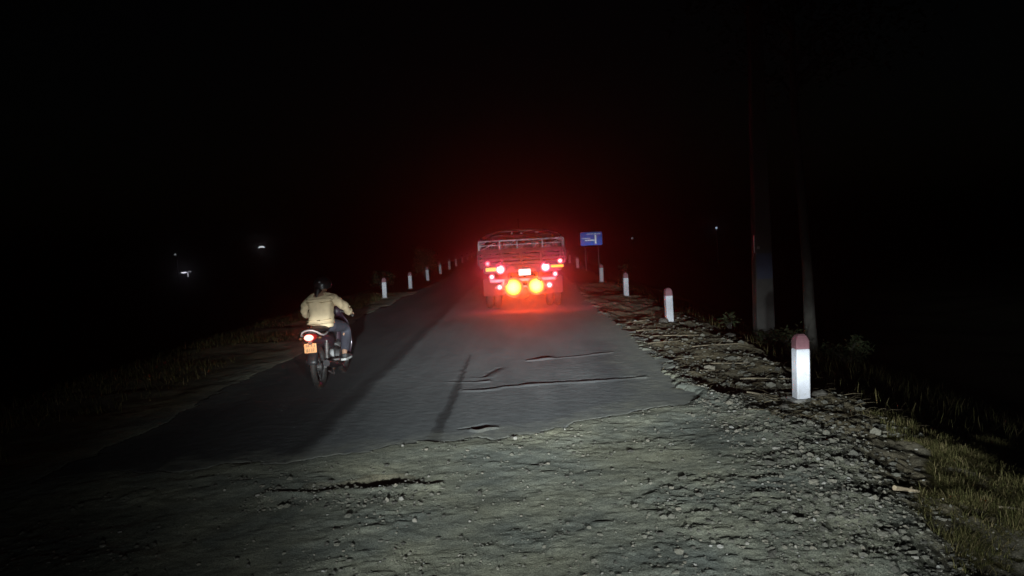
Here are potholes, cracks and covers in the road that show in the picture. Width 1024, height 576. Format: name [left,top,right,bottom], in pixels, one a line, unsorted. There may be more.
crack [454,367,642,391]
crack [534,352,607,360]
